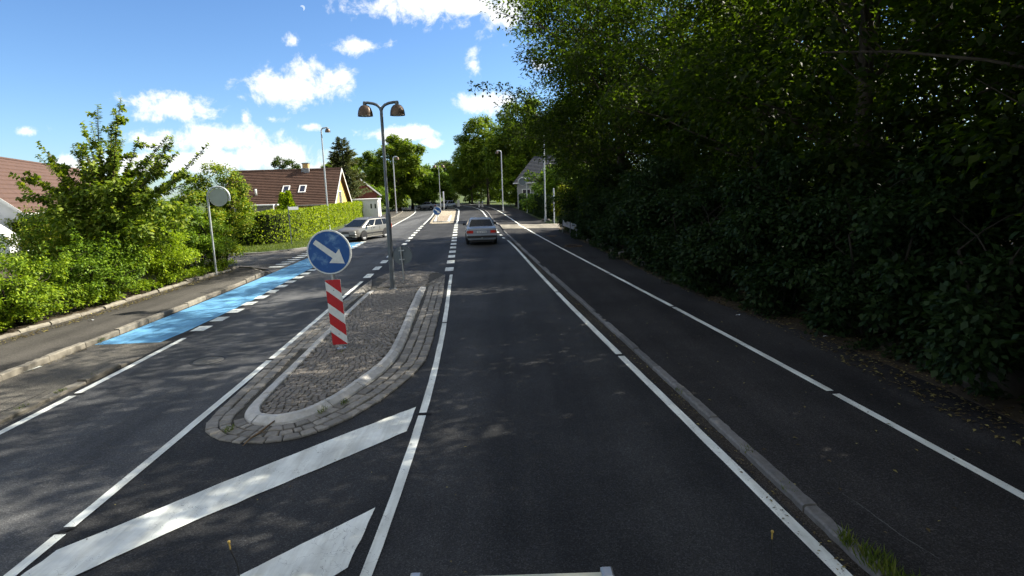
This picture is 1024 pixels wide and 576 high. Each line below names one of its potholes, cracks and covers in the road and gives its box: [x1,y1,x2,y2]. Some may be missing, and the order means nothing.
crack [843,494,939,559]
manhole cover [189,356,227,366]
